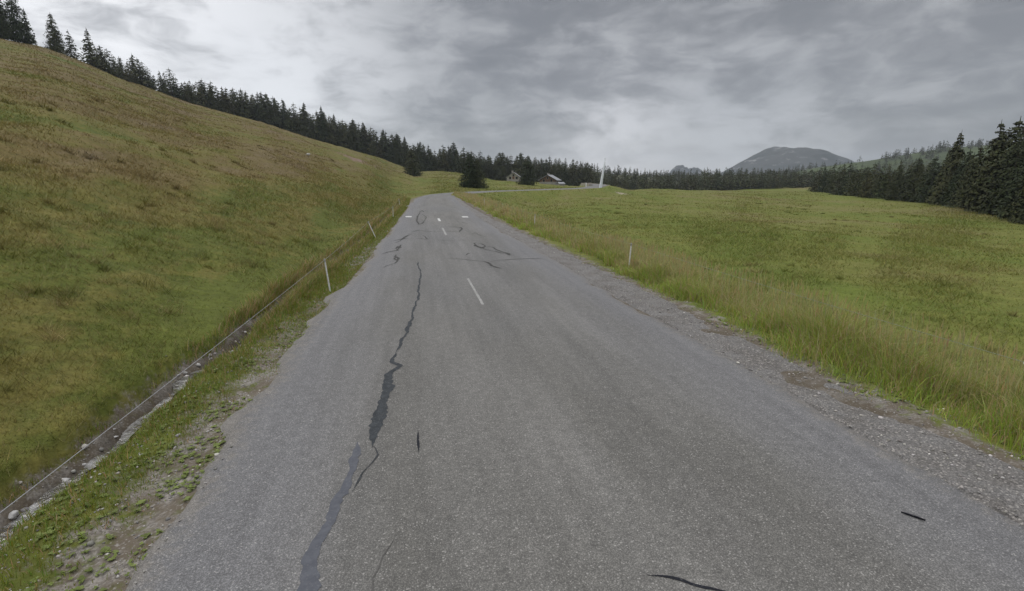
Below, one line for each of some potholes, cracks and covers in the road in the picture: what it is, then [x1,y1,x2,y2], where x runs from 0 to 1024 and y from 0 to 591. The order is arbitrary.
crack [372,529,400,591]
crack [383,210,541,269]
